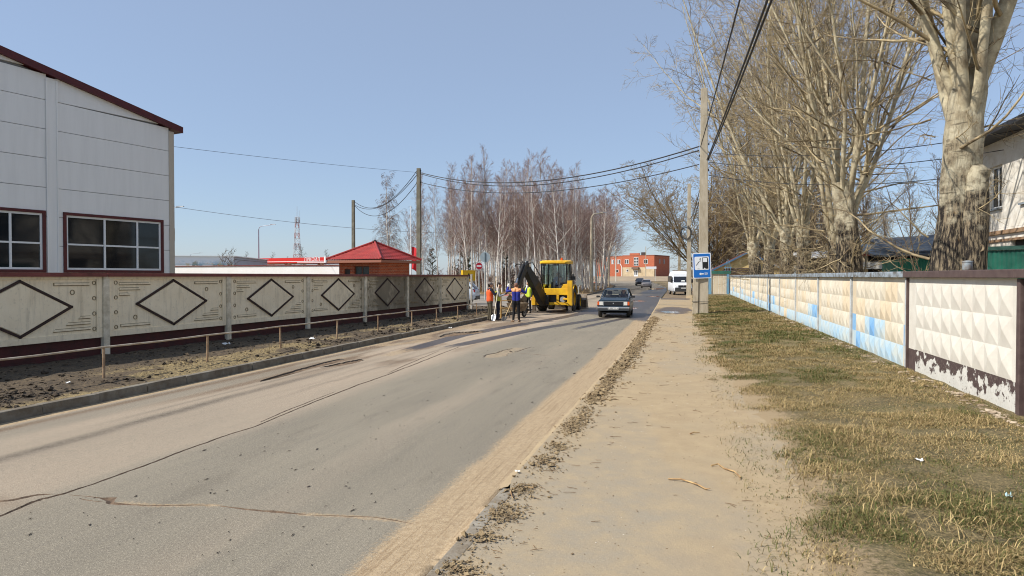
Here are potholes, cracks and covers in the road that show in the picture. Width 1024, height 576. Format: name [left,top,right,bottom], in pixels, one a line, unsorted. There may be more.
crack [0,347,458,524]
